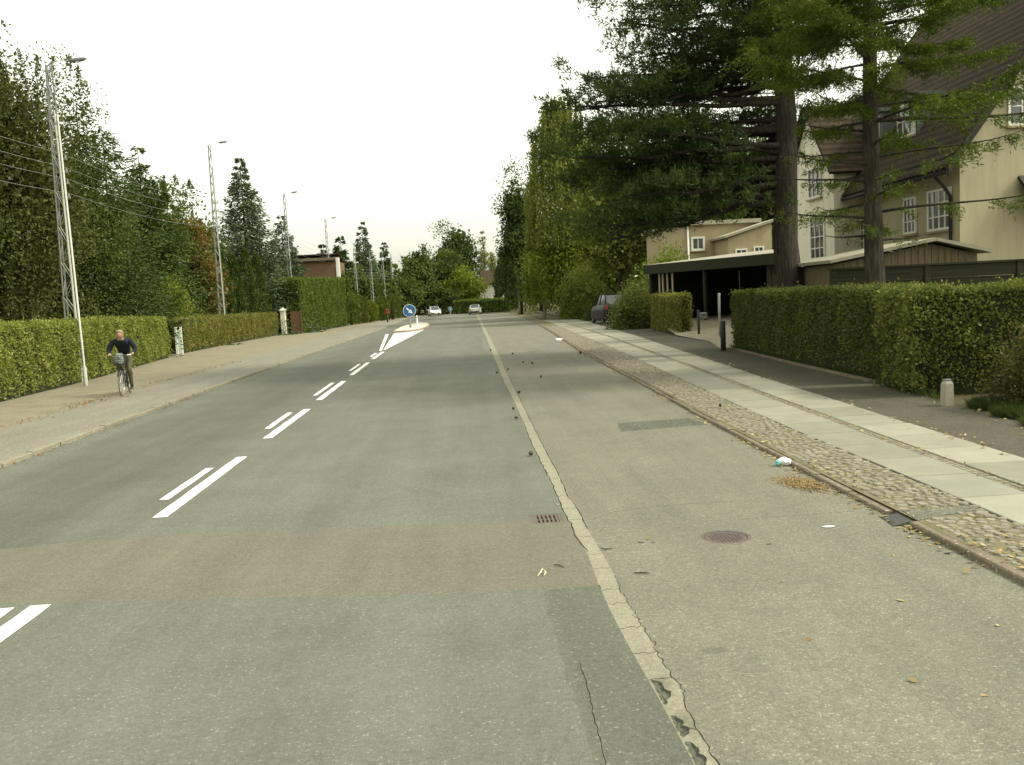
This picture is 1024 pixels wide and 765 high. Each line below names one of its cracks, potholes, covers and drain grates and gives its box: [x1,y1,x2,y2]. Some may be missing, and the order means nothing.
manhole cover [701,531,751,544]
pothole [684,741,707,765]
drain grate [530,513,565,524]
crack [579,662,606,765]
pothole [670,715,690,737]
pothole [651,679,671,705]
crack [614,576,720,765]
